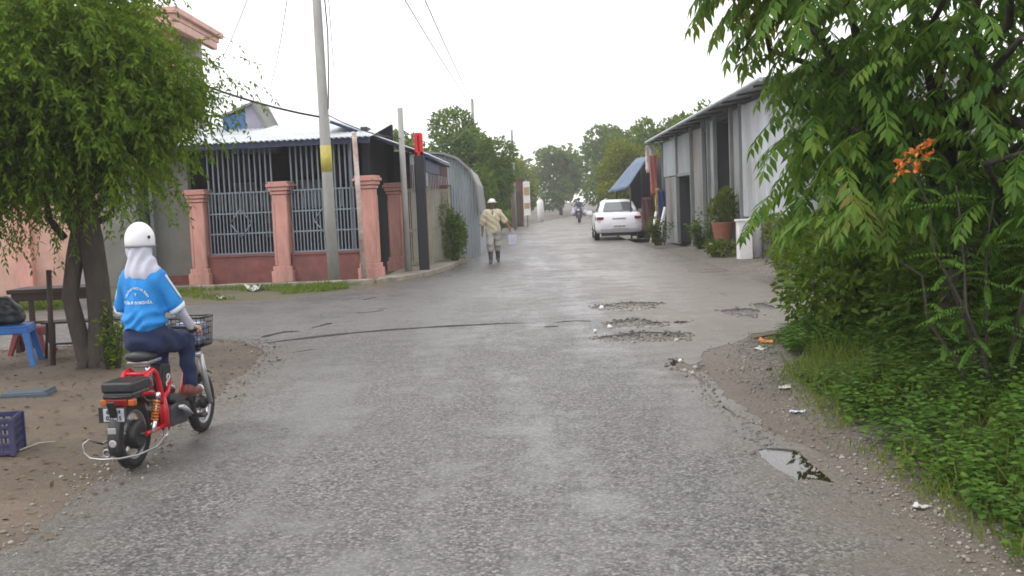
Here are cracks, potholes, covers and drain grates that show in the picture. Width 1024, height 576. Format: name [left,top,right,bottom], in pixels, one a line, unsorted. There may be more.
pothole [588,330,695,343]
crack [258,297,592,352]
pothole [601,317,670,328]
pothole [714,306,766,318]
pothole [588,301,667,312]
pothole [743,443,843,484]
